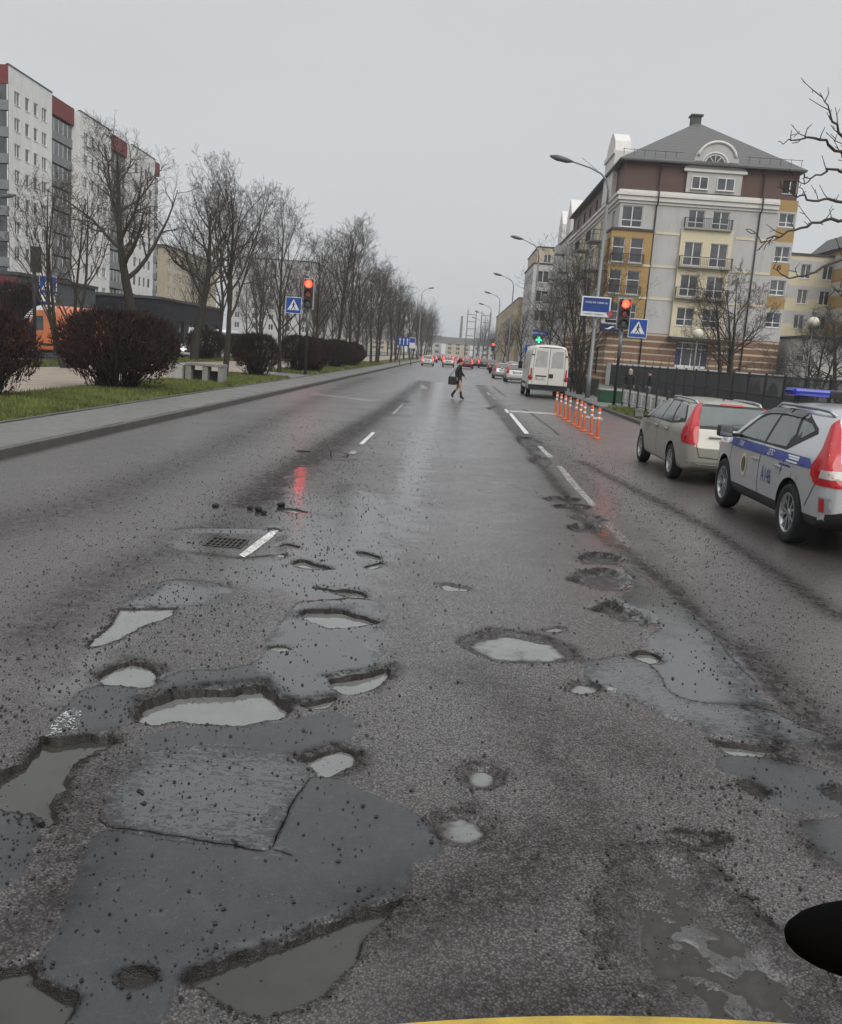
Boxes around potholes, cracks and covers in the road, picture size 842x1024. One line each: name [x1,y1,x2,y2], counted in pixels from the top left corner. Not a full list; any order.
pothole [567,681,602,694]
pothole [426,810,493,846]
pothole [458,763,504,789]
drain grate [203,537,250,549]
pothole [133,685,292,726]
pothole [86,607,176,647]
pothole [0,734,117,828]
pothole [293,559,332,569]
pothole [458,630,576,663]
pothole [184,894,408,1019]
pothole [567,568,631,591]
pothole [299,609,379,628]
